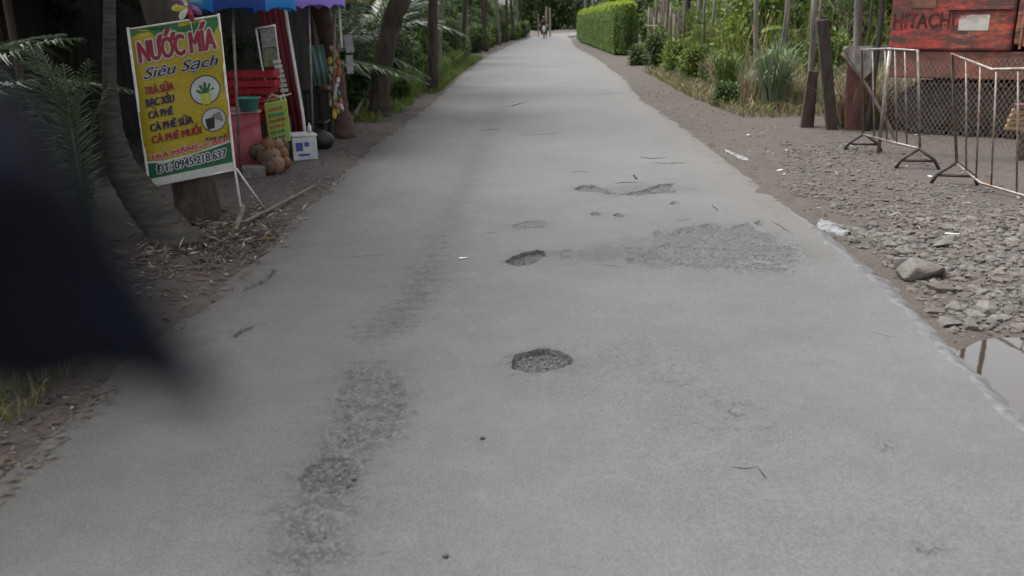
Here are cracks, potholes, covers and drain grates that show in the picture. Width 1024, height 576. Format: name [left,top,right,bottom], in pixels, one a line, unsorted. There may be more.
pothole [618,183,681,196]
pothole [574,185,619,195]
pothole [510,220,549,230]
pothole [505,250,546,266]
pothole [511,348,574,373]
